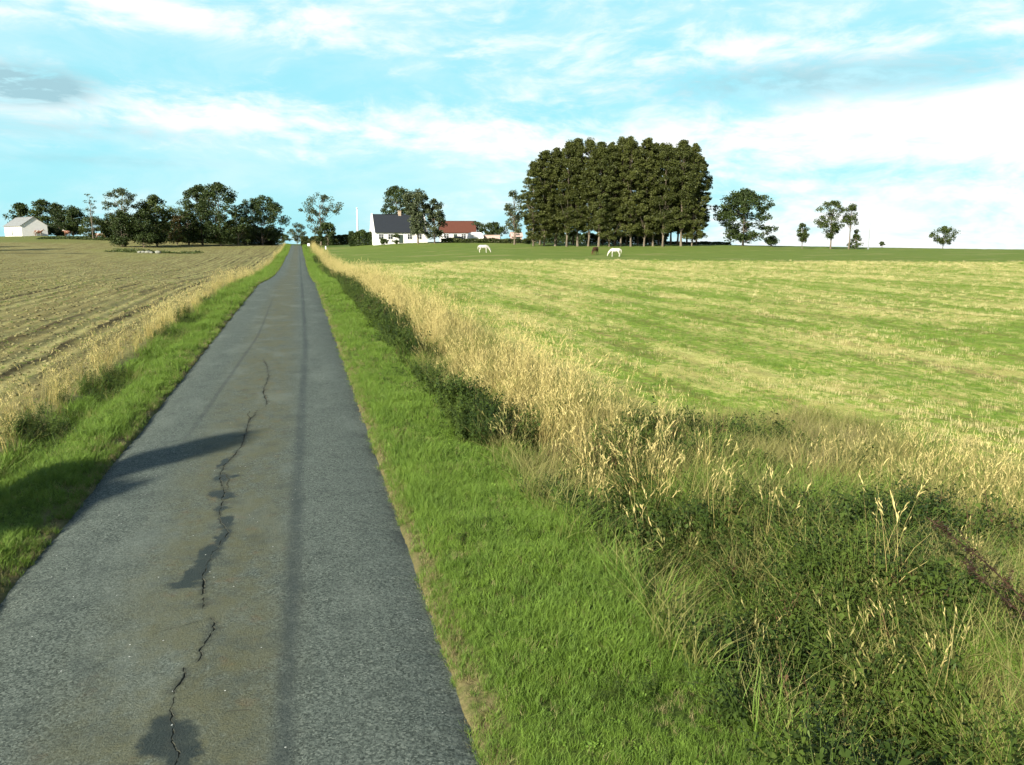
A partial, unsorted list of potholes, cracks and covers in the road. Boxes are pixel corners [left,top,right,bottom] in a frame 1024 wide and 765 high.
crack [152,361,285,765]
